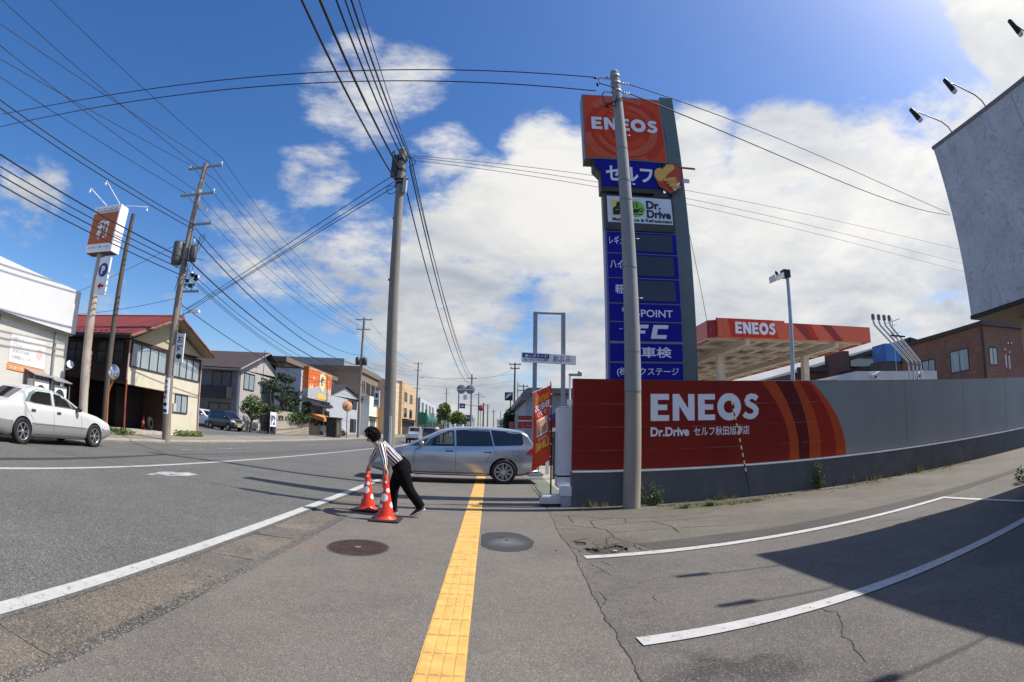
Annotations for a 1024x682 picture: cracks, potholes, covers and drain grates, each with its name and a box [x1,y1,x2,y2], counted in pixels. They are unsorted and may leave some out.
crack [821,608,867,663]
pothole [583,545,628,555]
manhole cover [326,539,390,556]
manhole cover [481,532,534,552]
crack [547,508,734,682]
